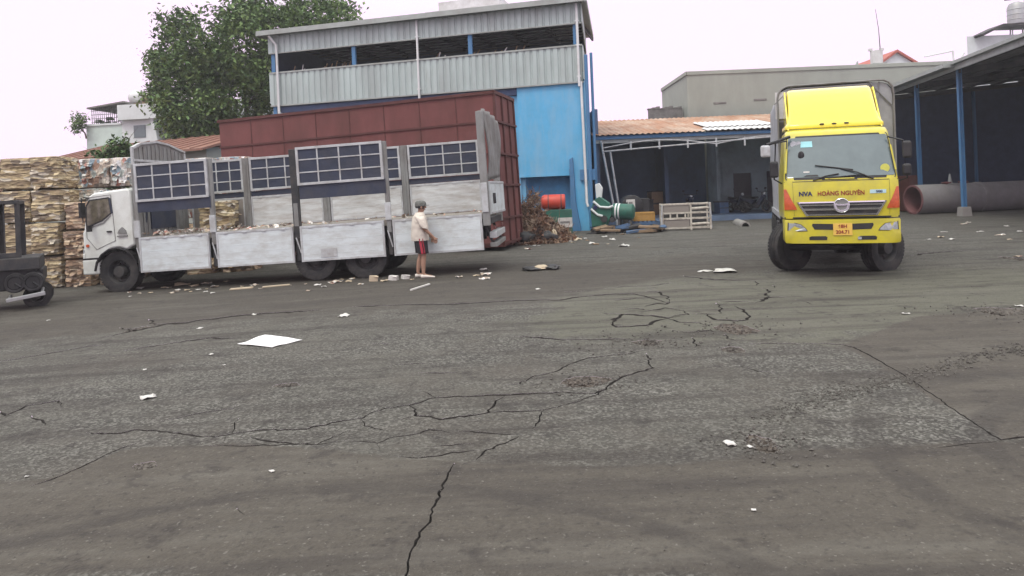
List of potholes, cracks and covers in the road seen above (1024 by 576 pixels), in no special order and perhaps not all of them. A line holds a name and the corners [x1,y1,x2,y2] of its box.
pothole [561,376,612,388]
crack [35,276,775,576]
crack [0,401,62,425]
